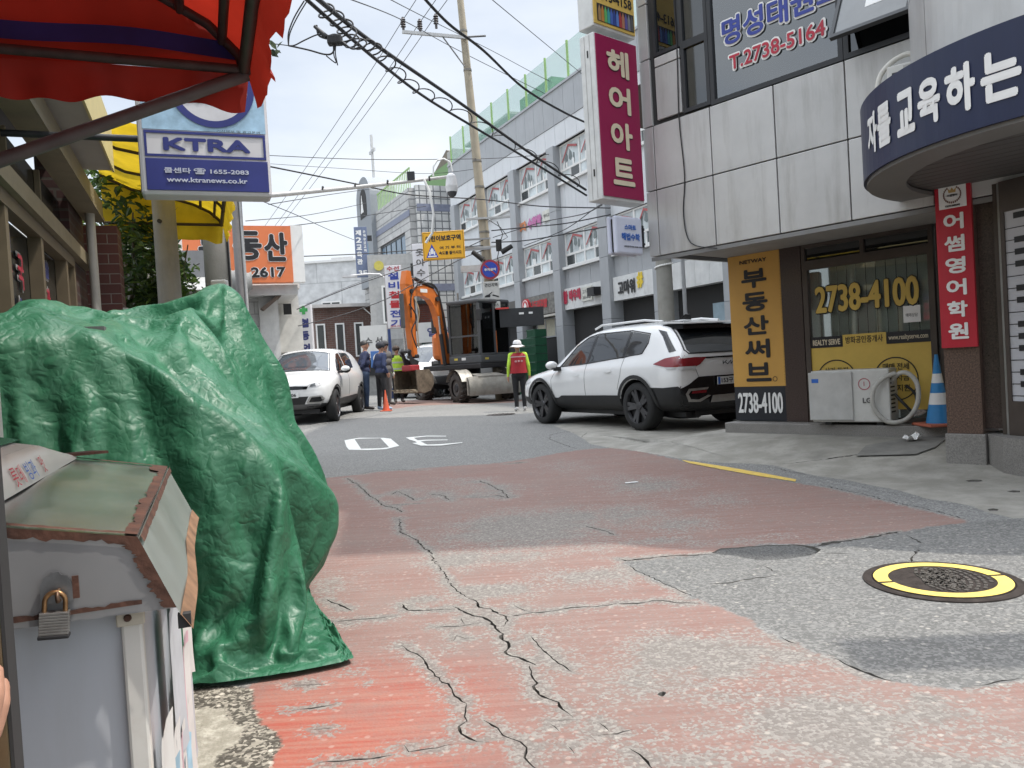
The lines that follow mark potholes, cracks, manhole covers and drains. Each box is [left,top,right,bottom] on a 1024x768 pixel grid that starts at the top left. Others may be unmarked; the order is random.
crack [319,470,702,768]
manhole cover [863,561,1024,603]
